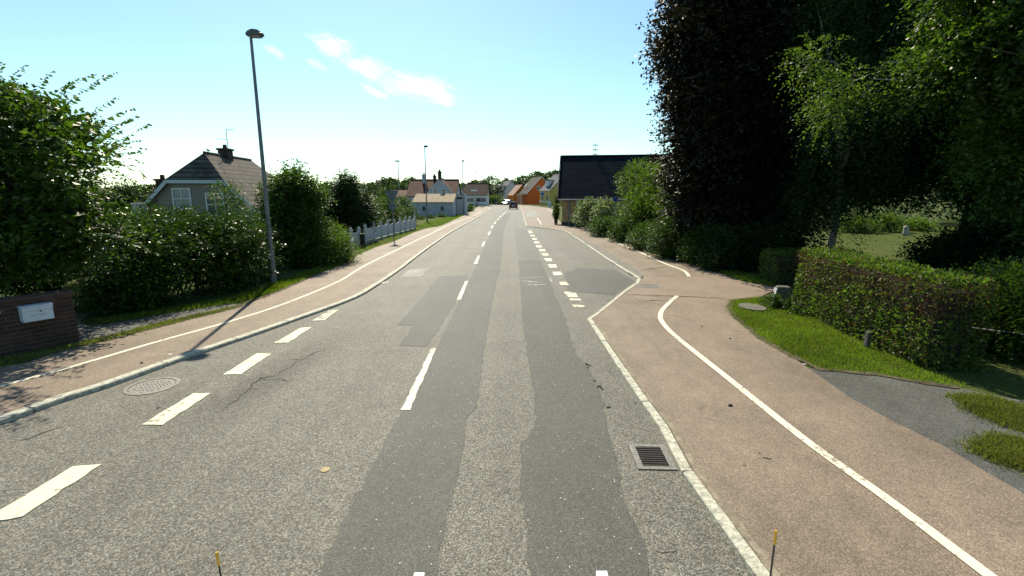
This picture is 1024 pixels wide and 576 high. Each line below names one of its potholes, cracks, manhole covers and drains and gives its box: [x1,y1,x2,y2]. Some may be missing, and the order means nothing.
crack [223,348,325,409]
manhole cover [123,377,181,395]
drain grate [628,444,678,471]
